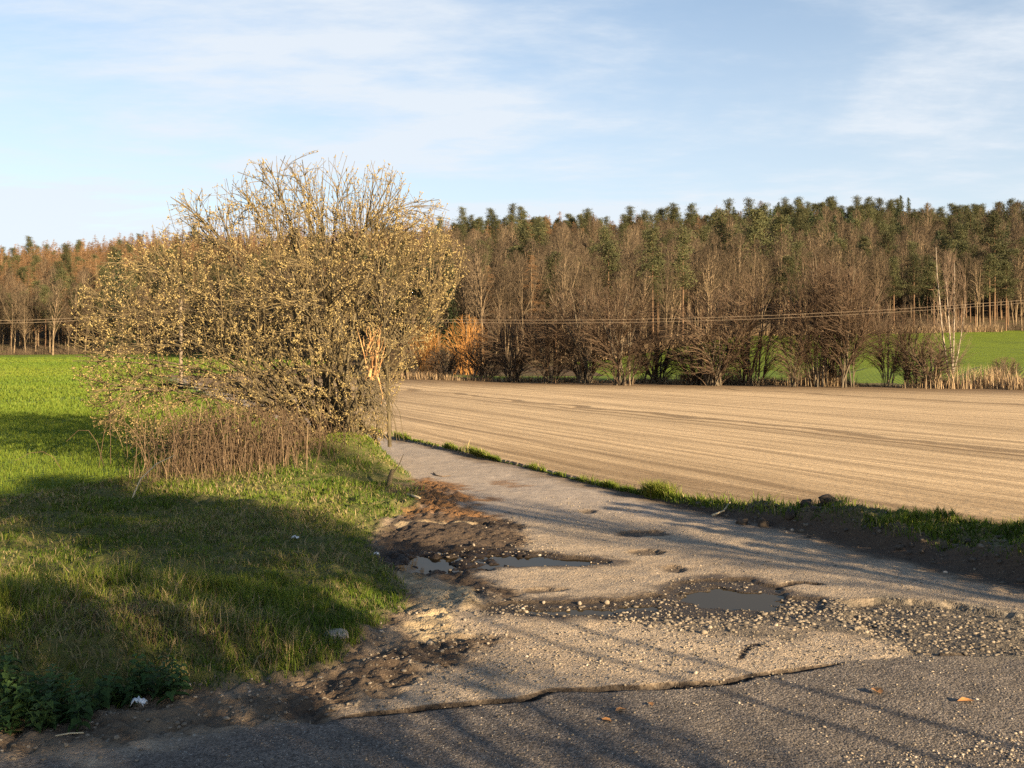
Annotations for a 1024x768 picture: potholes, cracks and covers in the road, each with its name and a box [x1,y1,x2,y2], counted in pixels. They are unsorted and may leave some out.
pothole [388,539,613,574]
pothole [661,565,688,573]
pothole [479,577,899,639]
